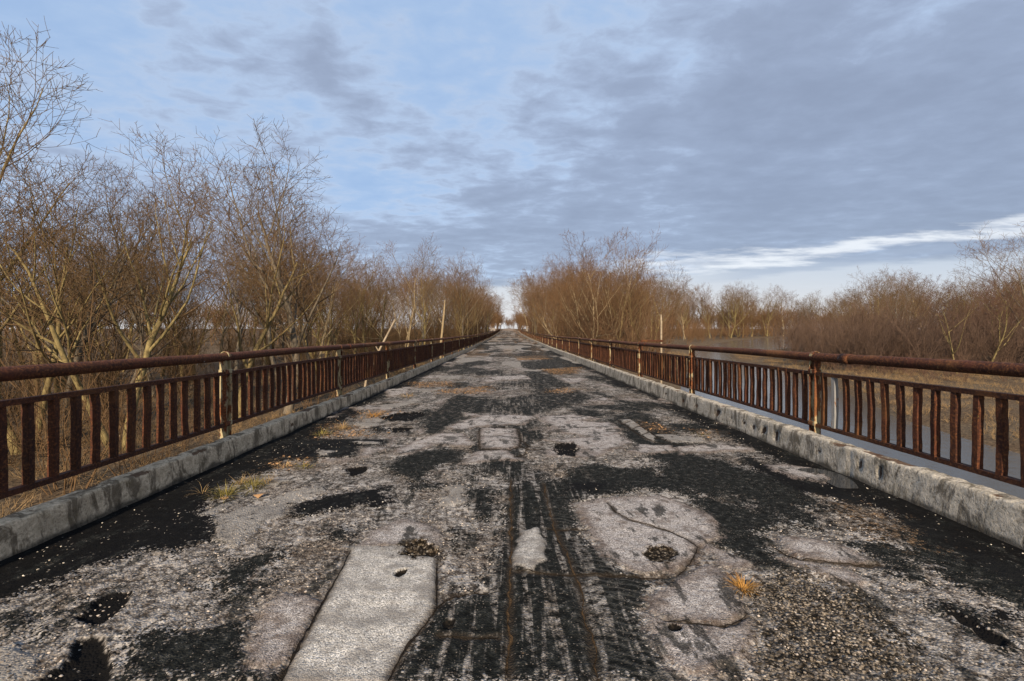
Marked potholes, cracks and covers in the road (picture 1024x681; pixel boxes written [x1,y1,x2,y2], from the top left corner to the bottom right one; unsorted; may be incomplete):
pothole [387,566,413,580]
crack [516,486,698,681]
pothole [343,465,375,477]
pothole [636,542,683,565]
pothole [60,590,139,632]
pothole [937,602,1020,653]
pothole [660,621,690,635]
pothole [550,442,583,458]
pothole [377,411,426,422]
pothole [395,537,444,563]
